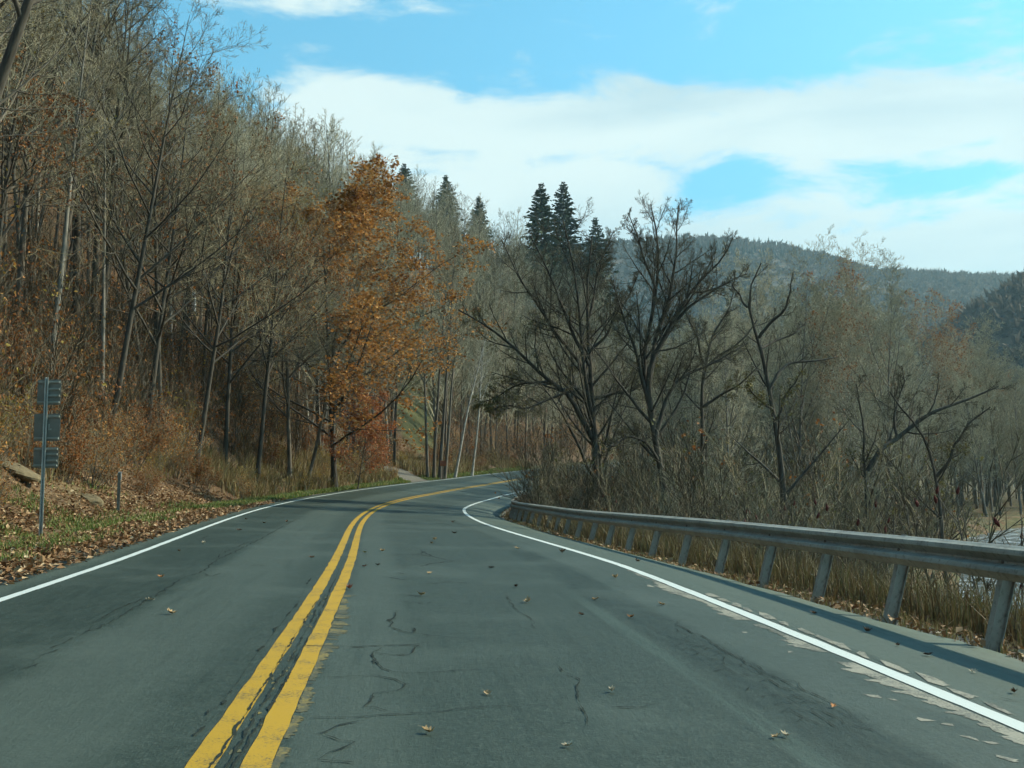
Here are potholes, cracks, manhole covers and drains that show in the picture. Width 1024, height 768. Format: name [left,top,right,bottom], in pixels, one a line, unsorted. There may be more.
crack [307,573,517,762]
crack [658,619,871,729]
crack [559,667,588,722]
